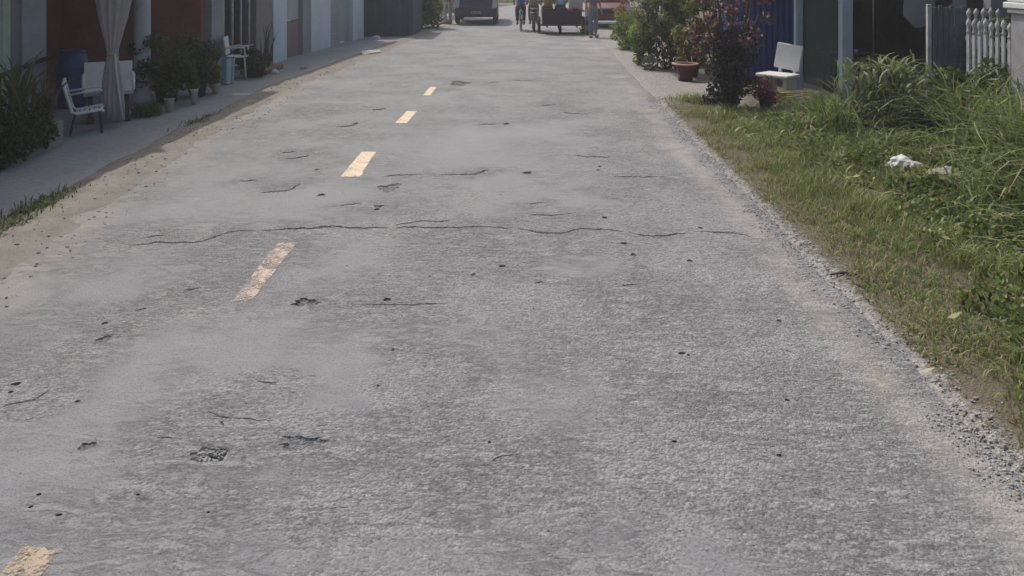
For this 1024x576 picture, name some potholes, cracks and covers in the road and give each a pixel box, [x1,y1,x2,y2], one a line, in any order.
pothole [377,183,402,193]
pothole [190,446,231,462]
crack [3,389,50,407]
crack [241,180,300,193]
crack [209,412,270,427]
pothole [290,298,322,306]
crack [128,202,750,245]
